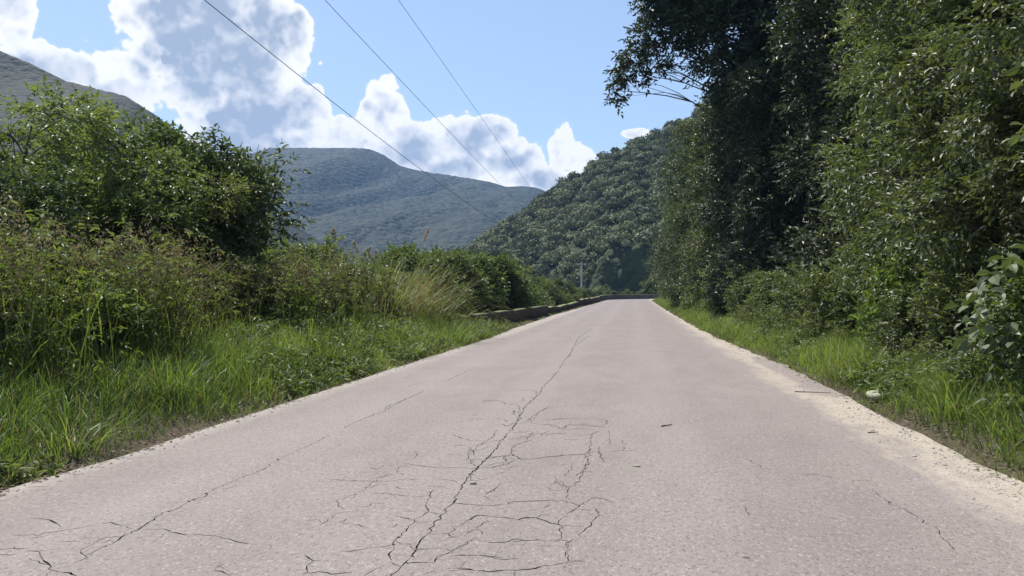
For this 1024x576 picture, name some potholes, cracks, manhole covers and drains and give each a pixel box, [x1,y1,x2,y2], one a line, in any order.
crack [0,372,465,576]
crack [750,460,955,550]
crack [303,330,636,576]
